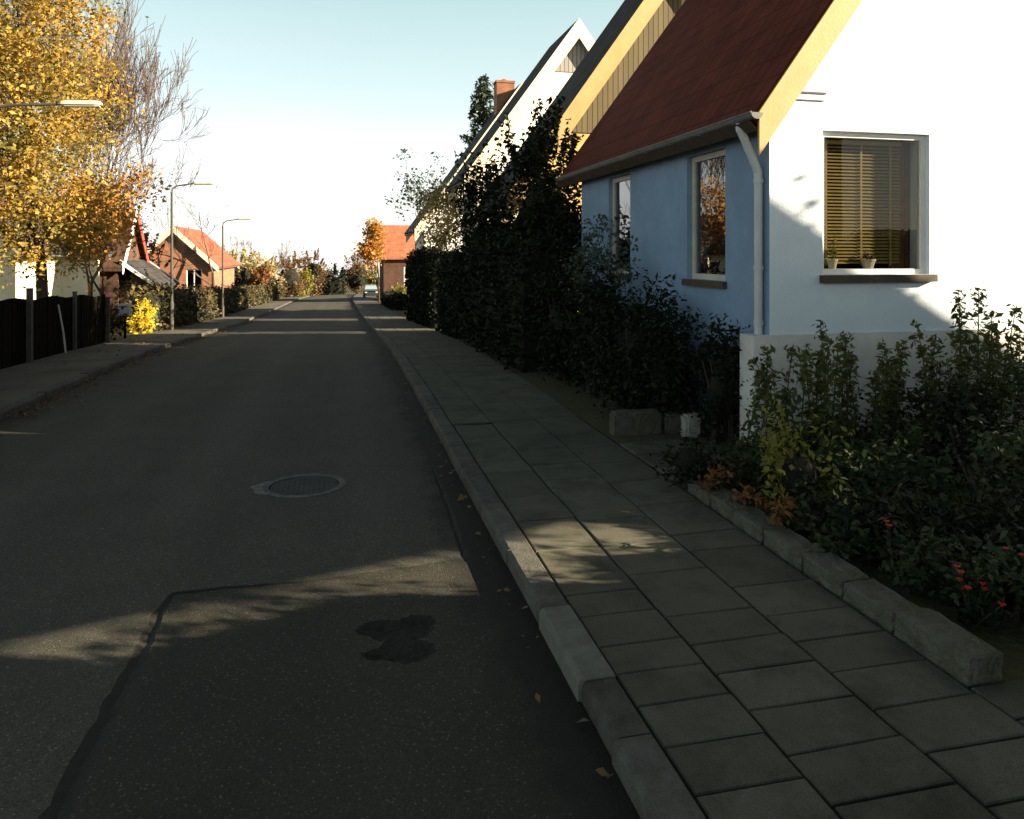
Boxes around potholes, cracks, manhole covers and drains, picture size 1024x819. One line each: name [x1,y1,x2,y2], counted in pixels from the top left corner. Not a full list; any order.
manhole cover [251,473,346,498]
